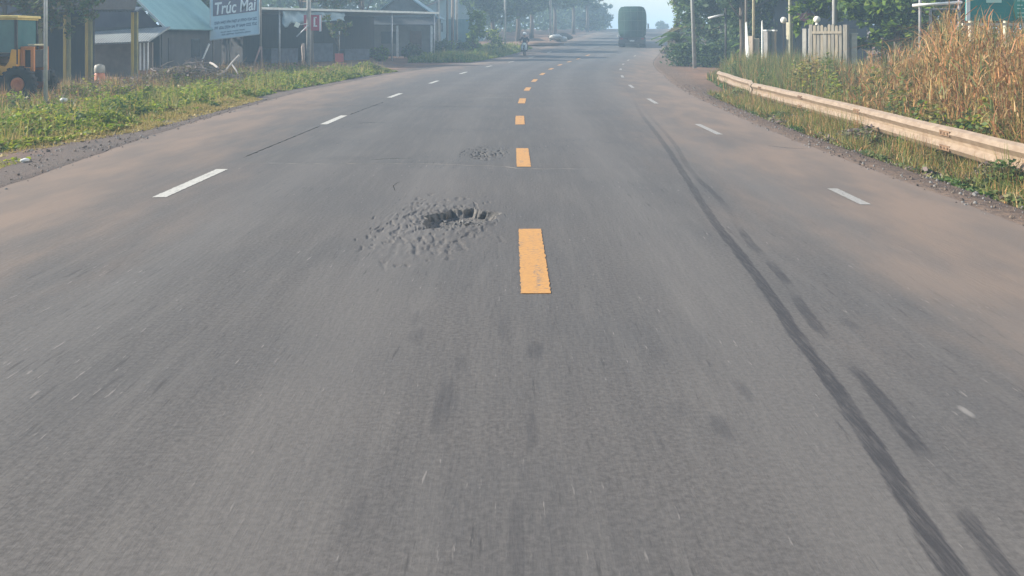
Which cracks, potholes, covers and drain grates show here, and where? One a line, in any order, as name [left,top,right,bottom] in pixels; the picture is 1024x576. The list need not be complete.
pothole [422,207,502,230]
